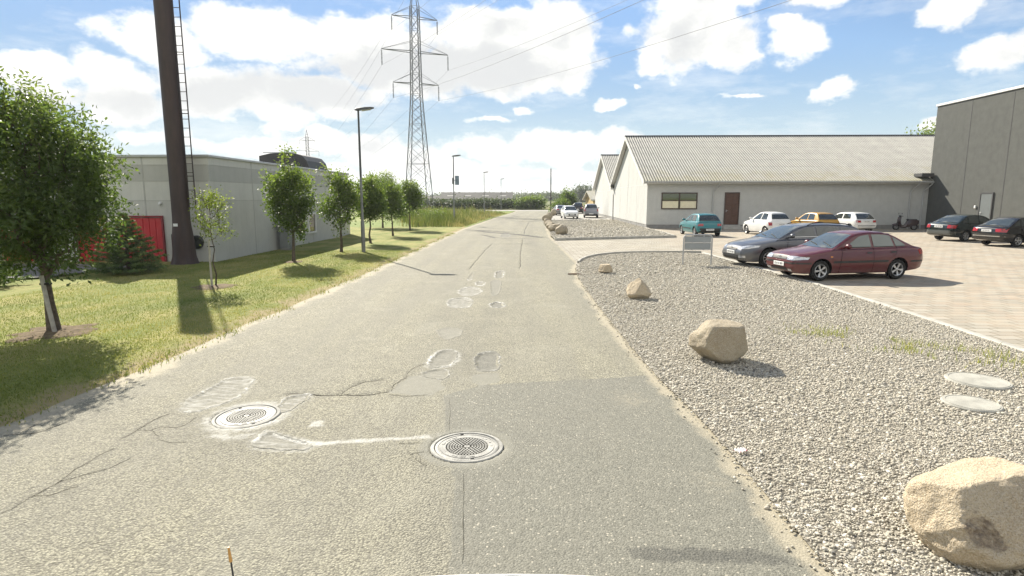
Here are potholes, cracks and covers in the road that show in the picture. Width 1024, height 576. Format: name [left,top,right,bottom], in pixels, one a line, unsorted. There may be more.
manhole cover [211,404,281,429]
crack [286,364,423,396]
crack [2,449,130,513]
manhole cover [430,432,503,463]
